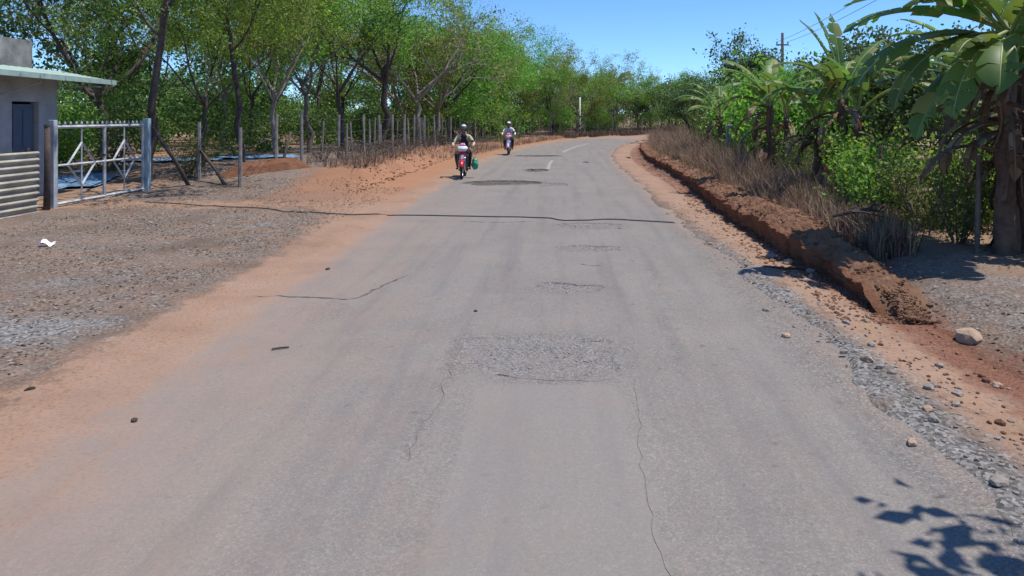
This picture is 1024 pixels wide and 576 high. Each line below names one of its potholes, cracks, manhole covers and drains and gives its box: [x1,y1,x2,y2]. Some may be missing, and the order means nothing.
crack [633,380,671,576]
crack [408,364,457,461]
crack [258,274,410,300]
